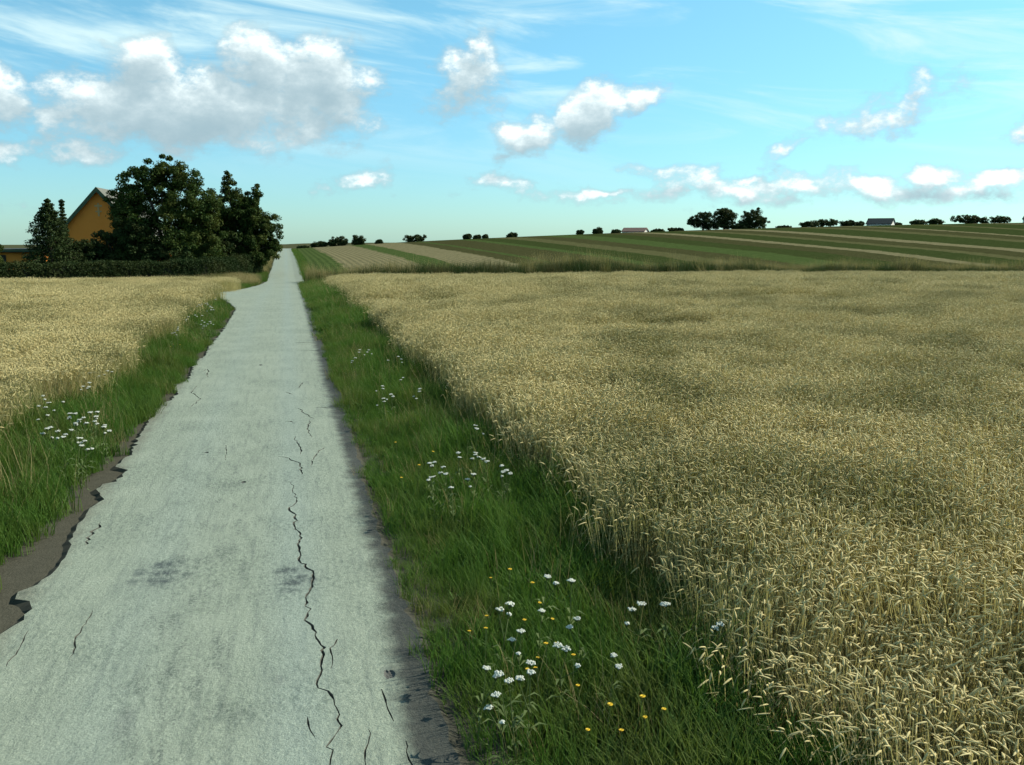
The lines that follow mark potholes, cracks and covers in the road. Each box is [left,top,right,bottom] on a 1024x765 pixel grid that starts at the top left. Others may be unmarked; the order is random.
crack [278,383,343,765]
crack [364,689,394,765]
crack [69,611,93,658]
crack [85,523,101,545]
